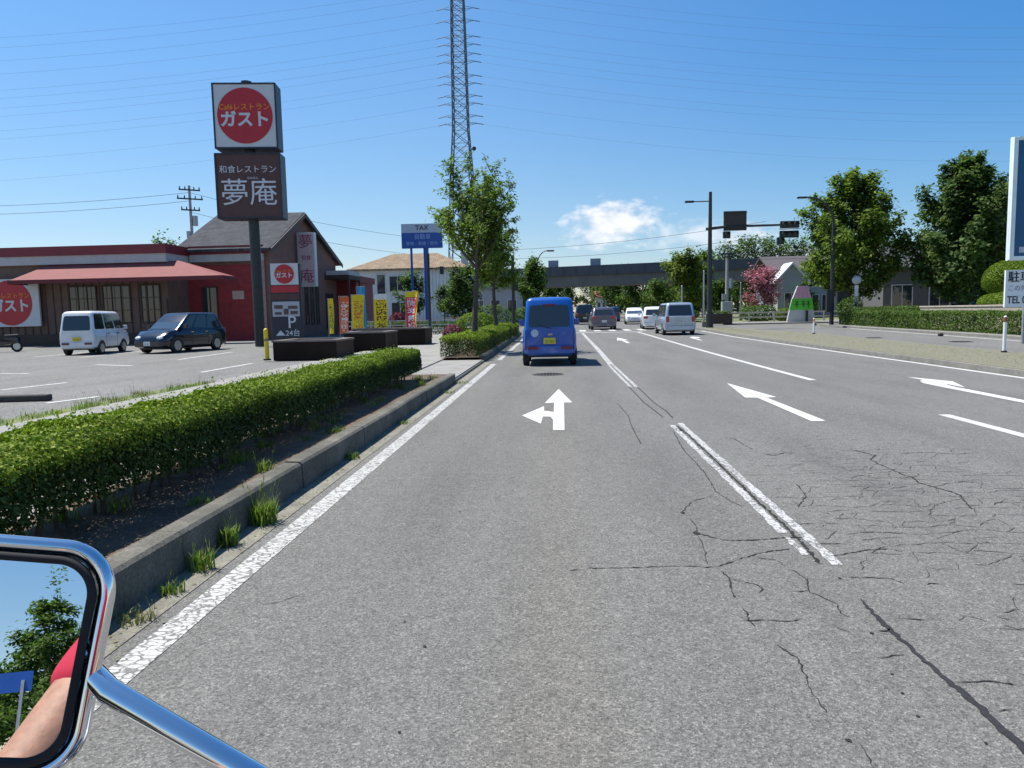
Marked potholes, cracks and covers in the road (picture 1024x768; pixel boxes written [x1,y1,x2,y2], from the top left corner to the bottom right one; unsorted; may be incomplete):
crack [568,431,1024,633]
crack [778,645,826,710]
